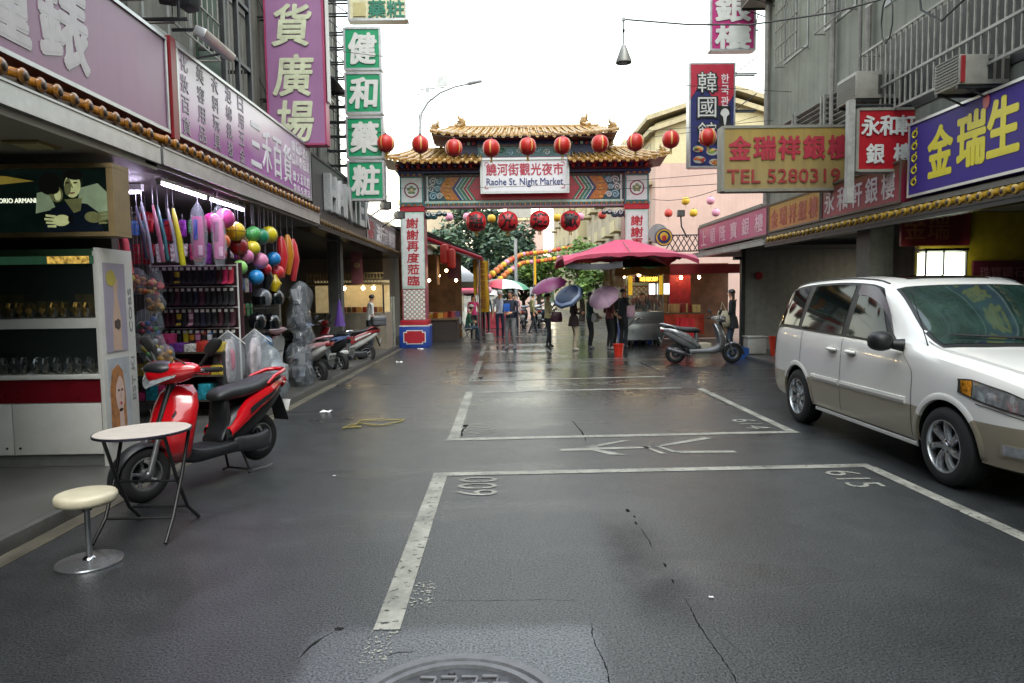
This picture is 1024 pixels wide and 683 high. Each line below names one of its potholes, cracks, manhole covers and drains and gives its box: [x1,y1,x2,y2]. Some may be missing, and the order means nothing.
crack [451,599,610,683]
manhole cover [366,653,556,683]
